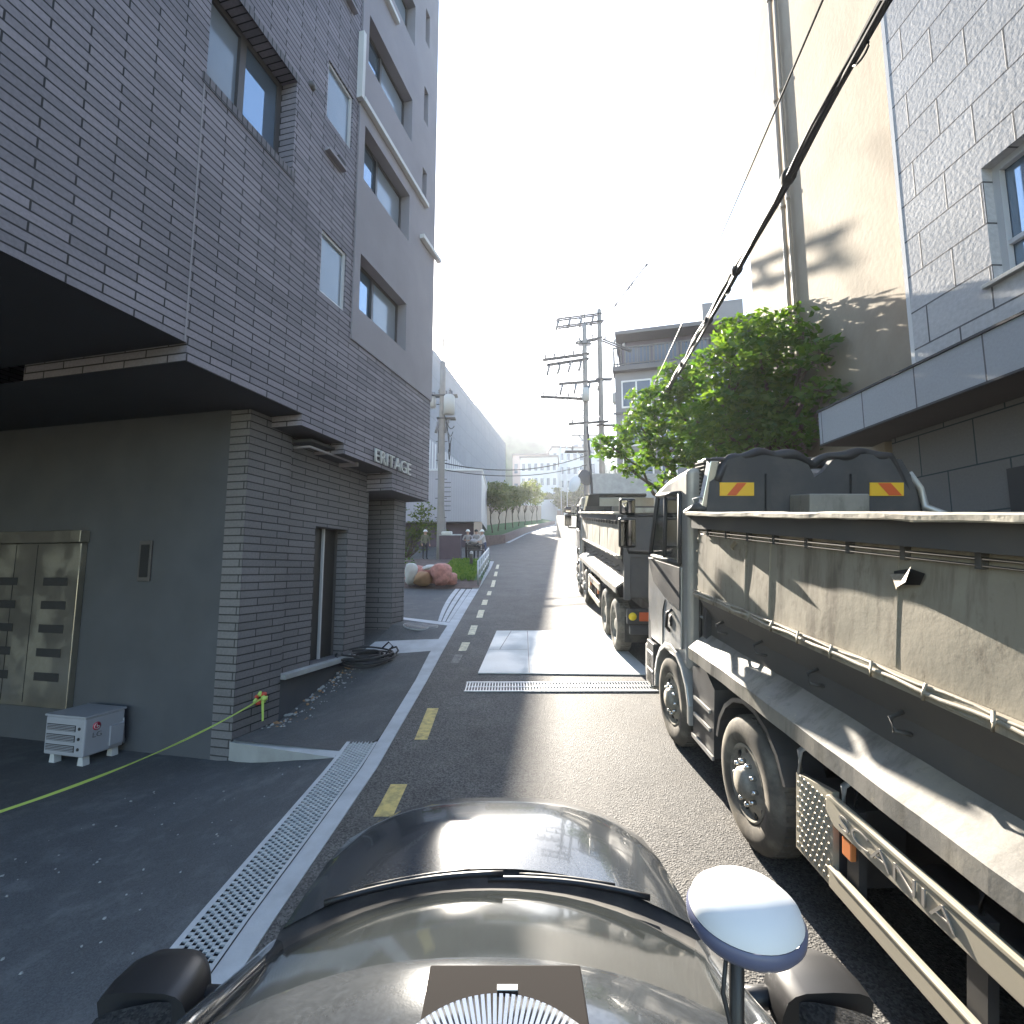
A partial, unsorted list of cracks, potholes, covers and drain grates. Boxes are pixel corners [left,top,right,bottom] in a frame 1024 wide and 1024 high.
drain grate [464,682,659,692]
manhole cover [403,623,429,631]
drain grate [169,742,377,974]
